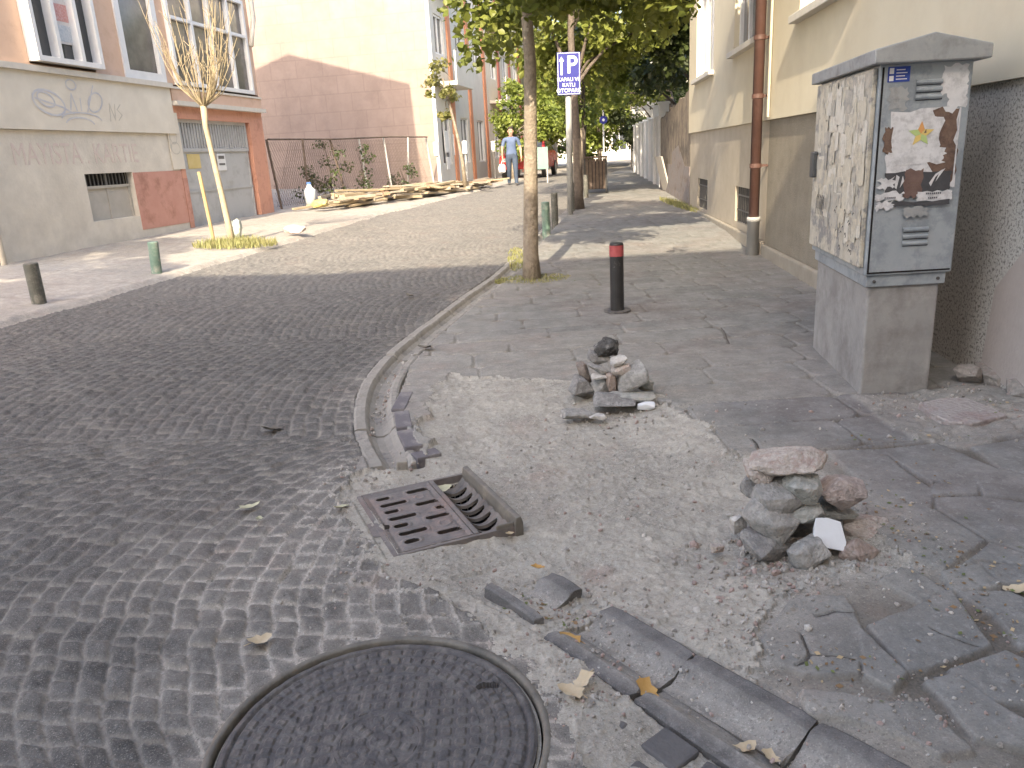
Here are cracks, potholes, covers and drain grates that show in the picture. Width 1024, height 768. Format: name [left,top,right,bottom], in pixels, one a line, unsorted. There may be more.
pothole [336,372,916,768]
drain grate [357,466,524,557]
crack [797,634,855,666]
manhole cover [201,636,552,768]
